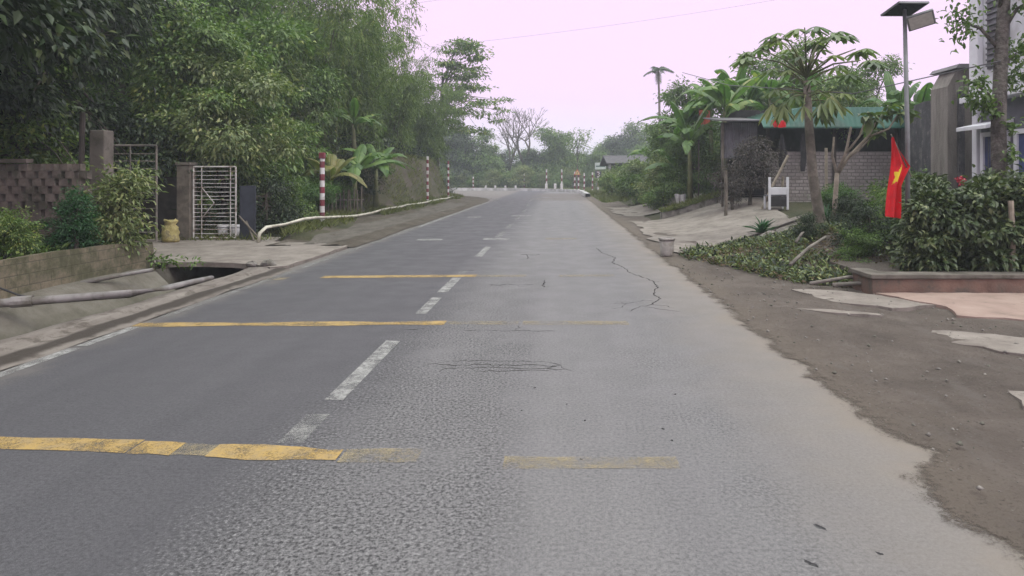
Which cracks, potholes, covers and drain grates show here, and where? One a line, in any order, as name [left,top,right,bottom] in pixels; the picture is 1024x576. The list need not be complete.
crack [596,248,672,311]
